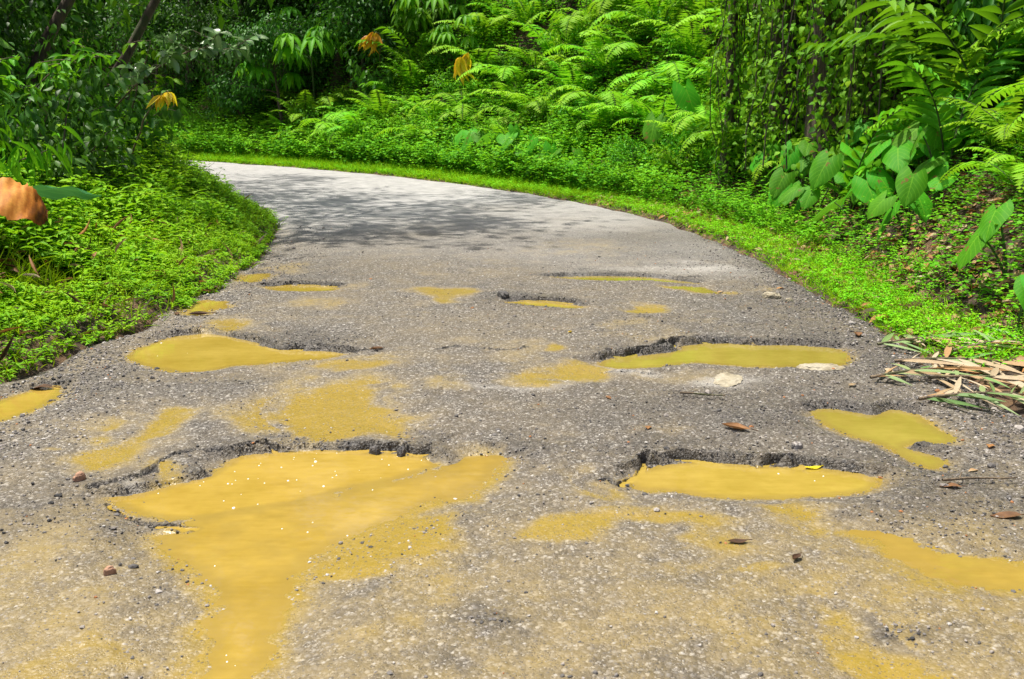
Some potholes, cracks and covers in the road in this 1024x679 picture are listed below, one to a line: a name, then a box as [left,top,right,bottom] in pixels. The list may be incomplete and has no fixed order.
pothole [590,336,857,369]
pothole [0,377,73,423]
pothole [551,273,701,284]
pothole [264,282,342,292]
pothole [503,299,586,308]
pothole [803,400,963,472]
pothole [97,441,445,523]
pothole [615,449,891,502]
pothole [121,328,349,373]
